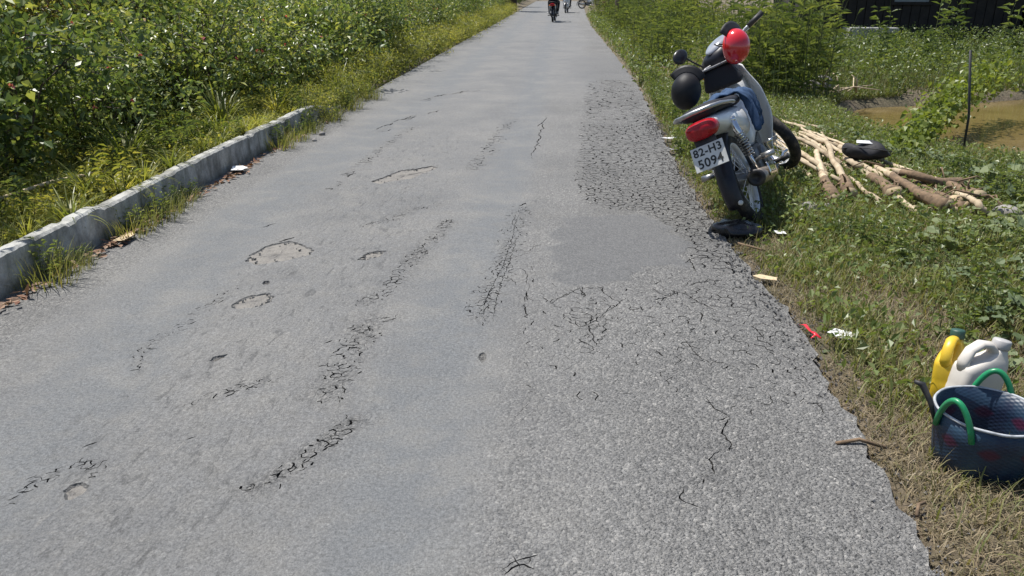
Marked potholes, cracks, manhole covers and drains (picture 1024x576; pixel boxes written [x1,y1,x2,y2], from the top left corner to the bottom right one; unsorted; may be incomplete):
pothole [245,241,314,265]
crack [464,81,824,445]
pothole [372,166,438,184]
crack [356,203,453,307]
pothole [357,251,386,260]
crack [8,442,107,504]
crack [679,398,732,508]
pothole [231,293,275,309]
crack [184,377,281,406]
crack [503,555,536,575]
crack [317,315,396,403]
crack [239,415,356,491]
